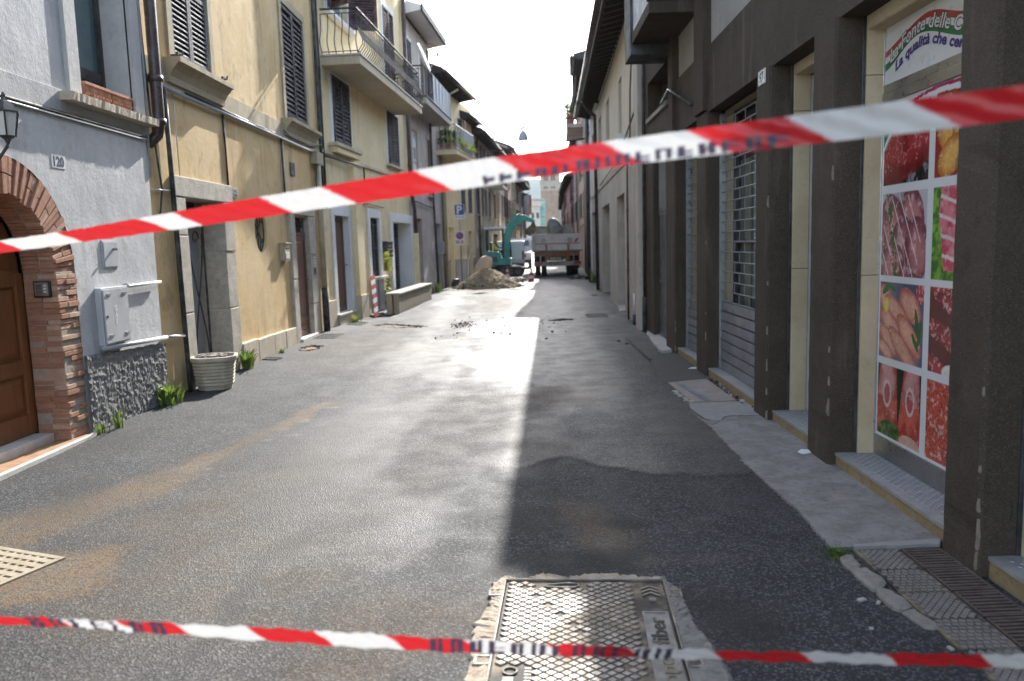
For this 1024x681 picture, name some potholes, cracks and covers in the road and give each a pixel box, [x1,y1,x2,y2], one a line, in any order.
drain grate [986,616,1024,650]
drain grate [925,567,995,593]
drain grate [953,589,1024,620]
drain grate [901,547,964,570]
manhole cover [462,572,733,681]
